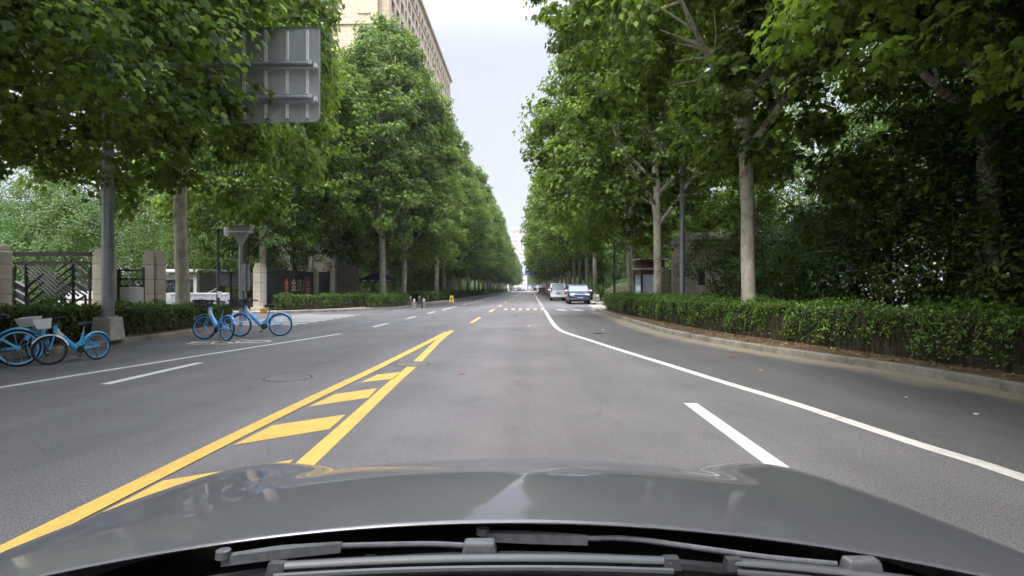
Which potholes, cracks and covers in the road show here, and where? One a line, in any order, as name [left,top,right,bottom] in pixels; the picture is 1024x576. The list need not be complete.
manhole cover [260,374,315,382]
